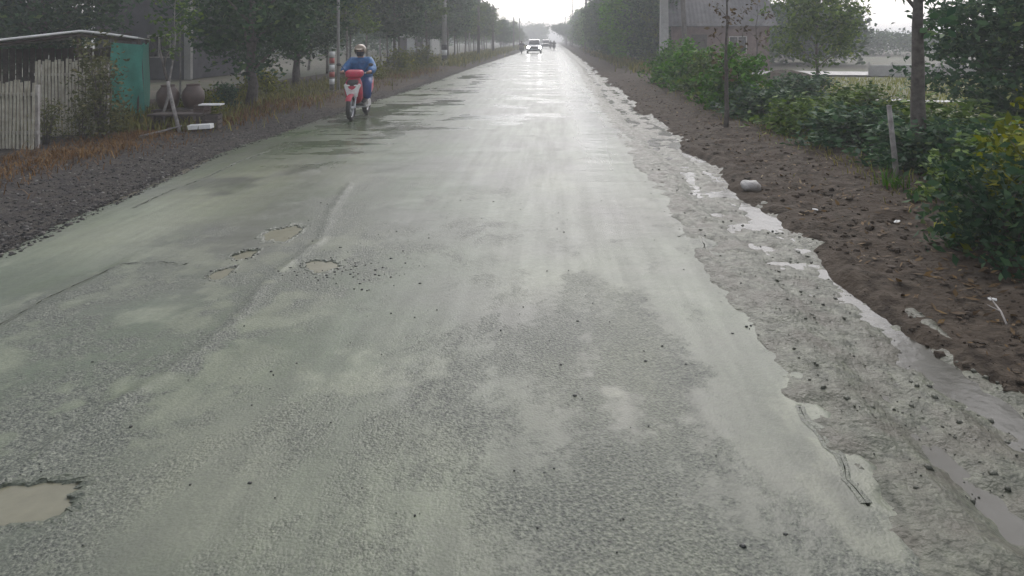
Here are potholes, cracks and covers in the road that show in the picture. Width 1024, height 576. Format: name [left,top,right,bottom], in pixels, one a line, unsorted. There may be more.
pothole [0,472,105,533]
pothole [226,247,264,262]
pothole [201,264,240,282]
pothole [254,222,309,244]
crack [796,405,873,505]
pothole [299,258,347,275]
crack [0,261,185,326]
